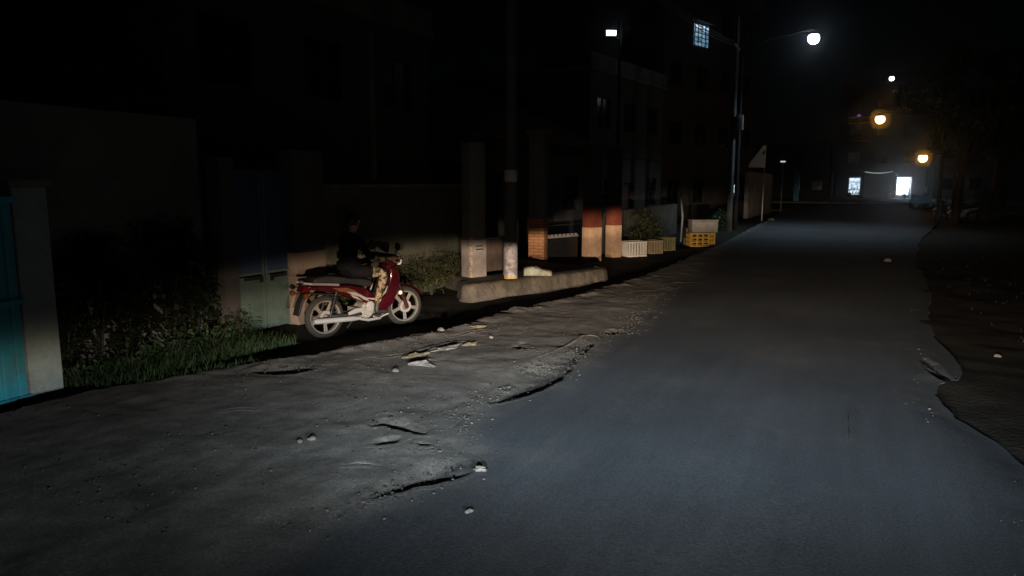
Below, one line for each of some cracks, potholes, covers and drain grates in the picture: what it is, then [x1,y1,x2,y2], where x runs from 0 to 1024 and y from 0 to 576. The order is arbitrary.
pothole [358,414,437,438]
pothole [480,334,603,405]
pothole [245,362,325,376]
crack [840,407,859,442]
pothole [350,453,482,504]
pothole [912,356,957,381]
